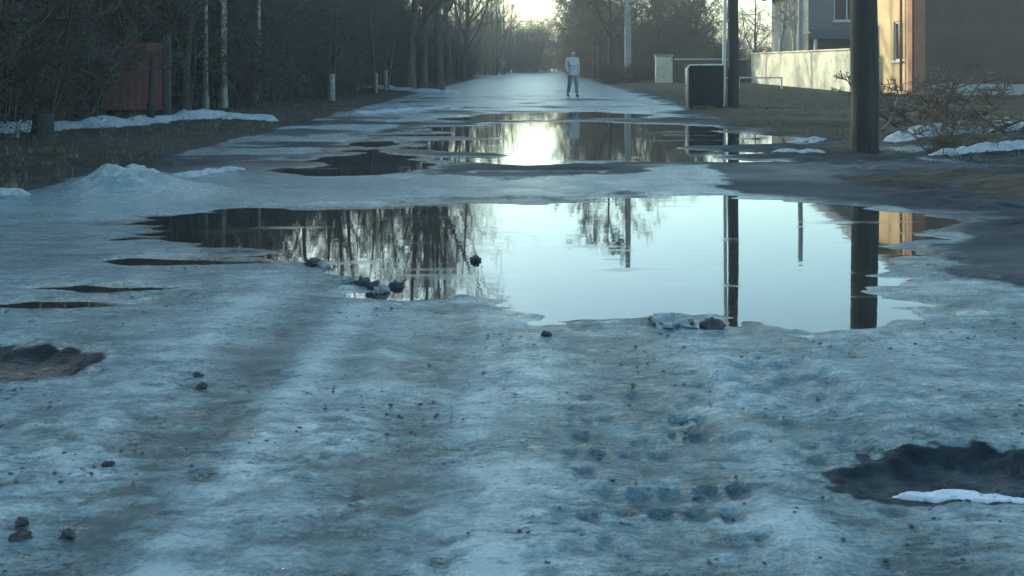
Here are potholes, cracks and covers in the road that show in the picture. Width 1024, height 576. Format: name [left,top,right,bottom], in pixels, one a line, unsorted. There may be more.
pothole [0,341,109,385]
pothole [816,438,1024,510]
